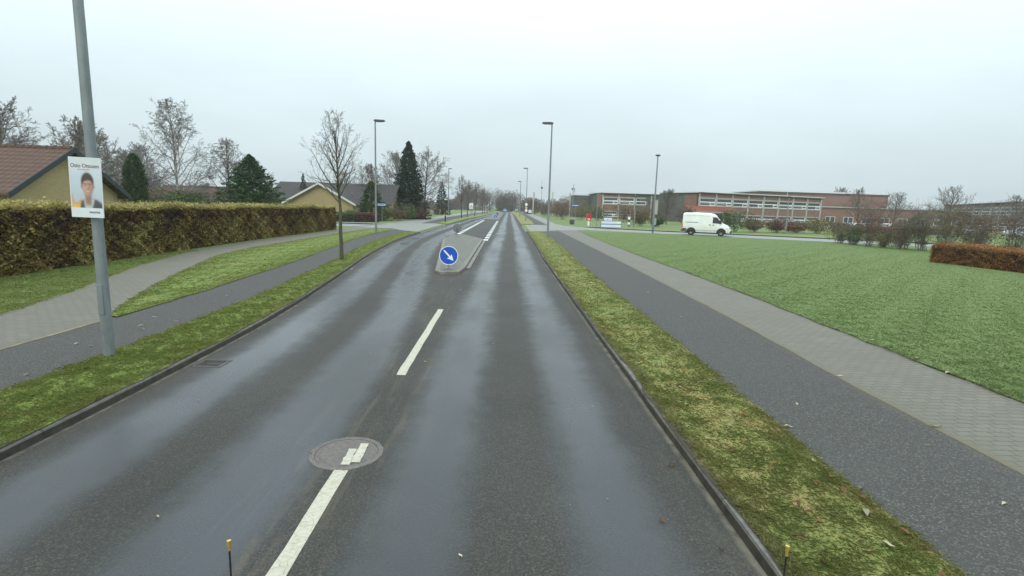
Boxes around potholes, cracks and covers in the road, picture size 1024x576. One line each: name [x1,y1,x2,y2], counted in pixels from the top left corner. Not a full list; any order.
manhole cover [308,437,384,470]
drain grate [191,359,232,368]
